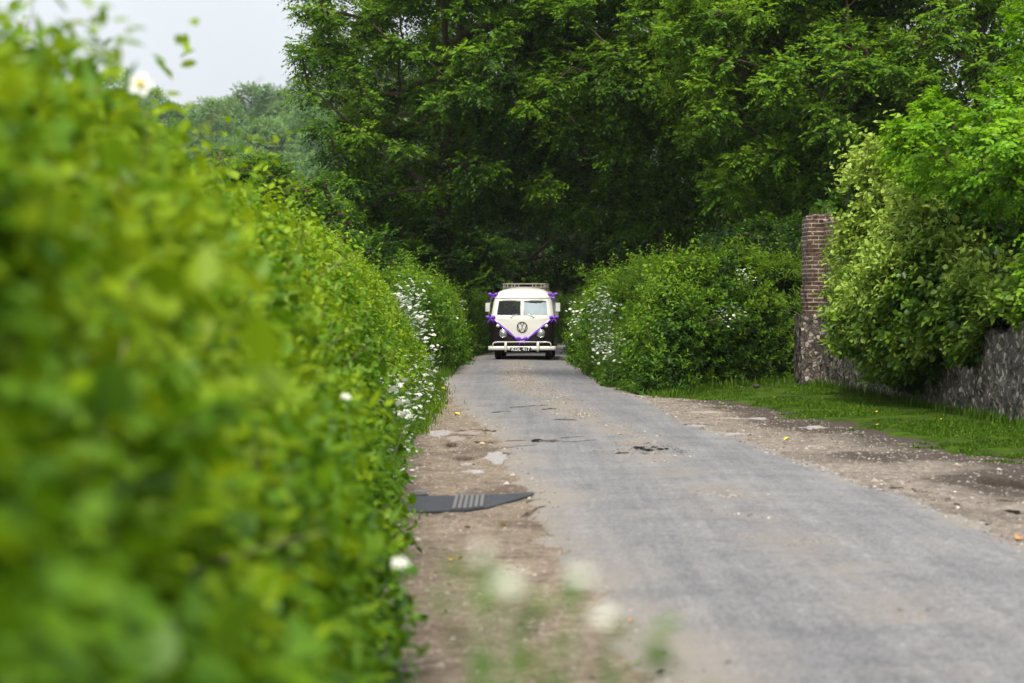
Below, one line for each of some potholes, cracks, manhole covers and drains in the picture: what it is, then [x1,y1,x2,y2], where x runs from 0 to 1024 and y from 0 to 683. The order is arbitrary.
crack [448,405,596,450]
